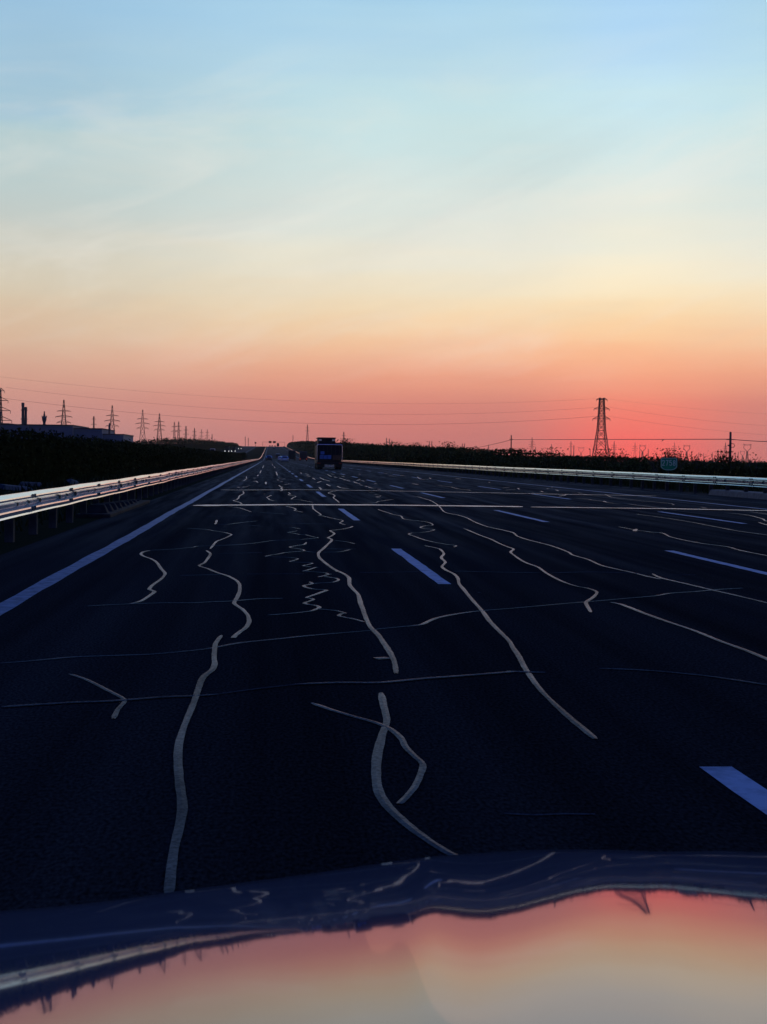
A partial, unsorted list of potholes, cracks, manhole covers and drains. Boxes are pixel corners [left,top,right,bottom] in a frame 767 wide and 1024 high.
crack [2,464,767,707]
